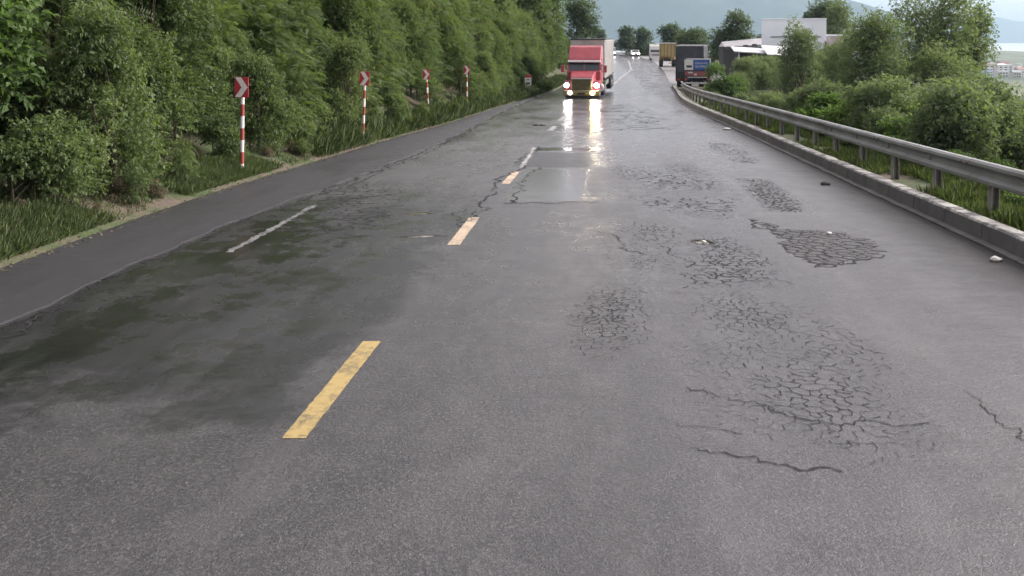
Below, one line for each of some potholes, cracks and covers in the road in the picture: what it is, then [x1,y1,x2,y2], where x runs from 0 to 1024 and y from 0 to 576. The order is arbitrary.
crack [567,280,655,361]
crack [595,162,888,289]
crack [643,290,944,474]
crack [451,147,575,227]
crack [966,391,1024,440]
crack [706,142,755,163]
